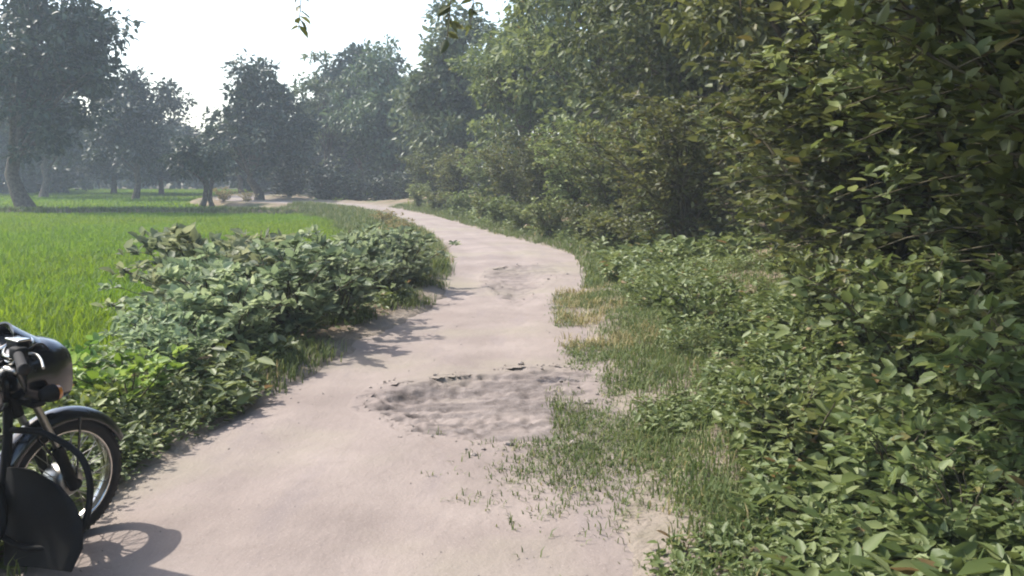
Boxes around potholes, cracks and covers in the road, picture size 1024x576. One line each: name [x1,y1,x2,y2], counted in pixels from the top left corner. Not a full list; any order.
pothole [346,361,621,456]
pothole [476,263,568,307]
